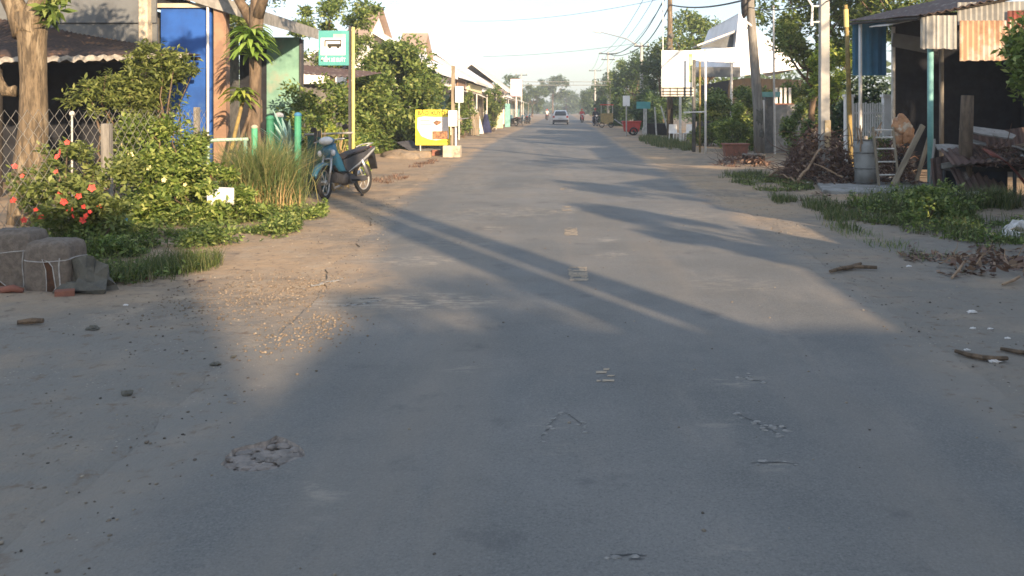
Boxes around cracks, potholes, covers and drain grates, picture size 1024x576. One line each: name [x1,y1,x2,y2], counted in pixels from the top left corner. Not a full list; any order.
crack [735,373,766,384]
crack [541,412,588,442]
pothole [221,436,305,471]
